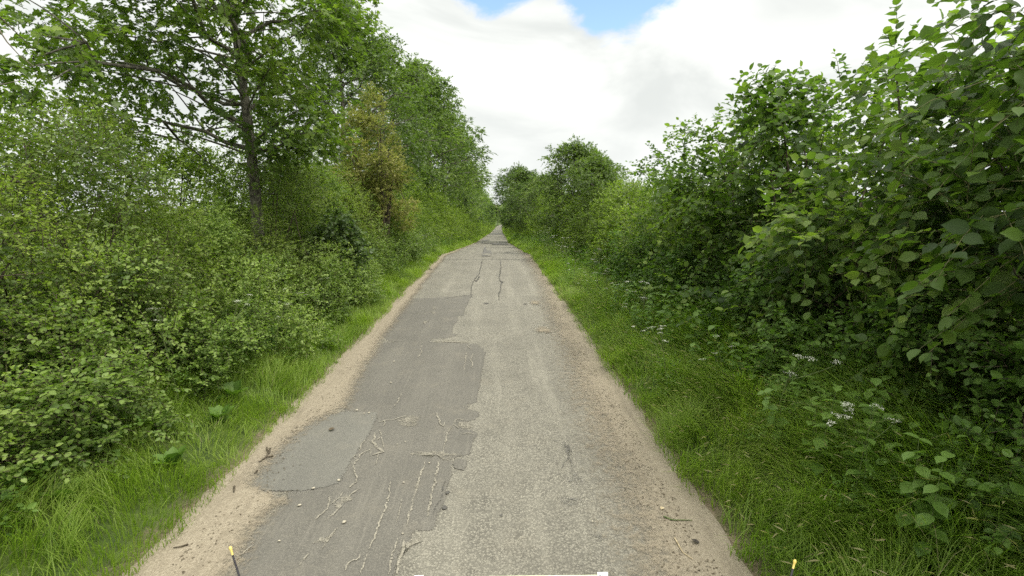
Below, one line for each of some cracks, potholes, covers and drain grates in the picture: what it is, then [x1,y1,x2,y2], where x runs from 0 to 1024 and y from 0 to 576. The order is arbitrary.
crack [299,394,474,574]
